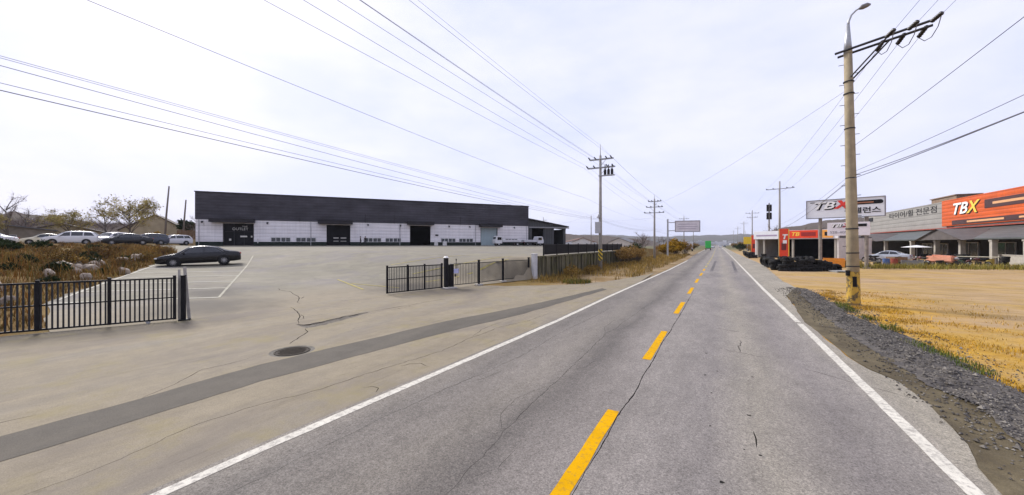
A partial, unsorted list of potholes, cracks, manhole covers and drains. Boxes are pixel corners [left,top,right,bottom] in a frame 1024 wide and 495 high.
manhole cover [269,345,315,357]
crack [25,317,537,495]
